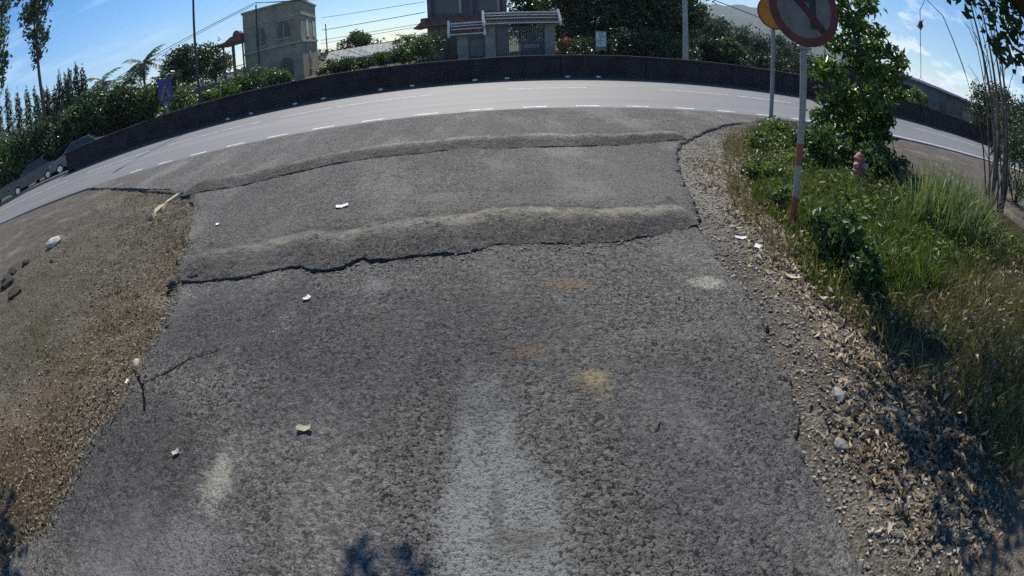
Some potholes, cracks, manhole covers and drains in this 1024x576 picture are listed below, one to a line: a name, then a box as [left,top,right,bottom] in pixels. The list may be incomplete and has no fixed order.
crack [132,351,217,409]
crack [183,240,626,284]
